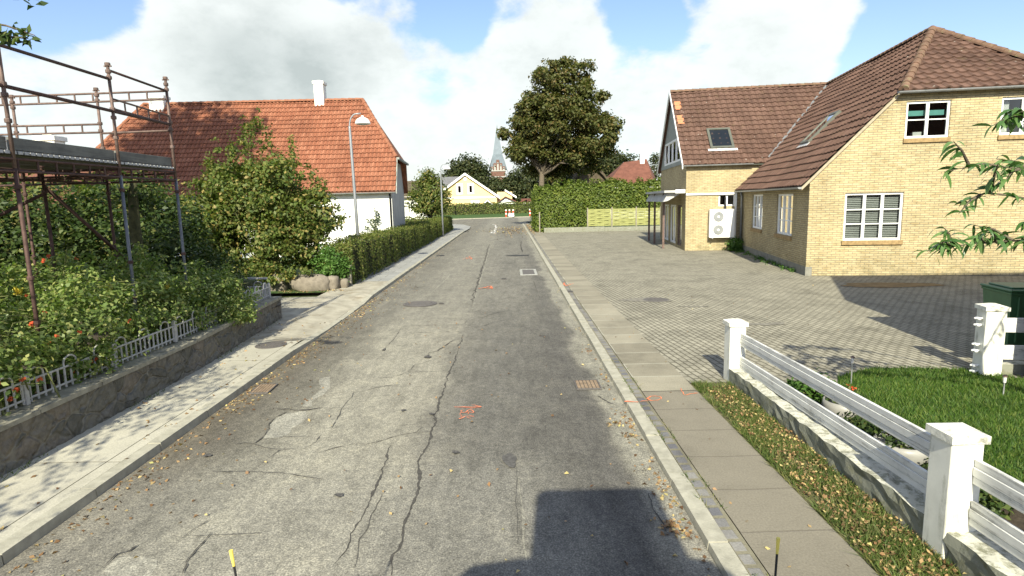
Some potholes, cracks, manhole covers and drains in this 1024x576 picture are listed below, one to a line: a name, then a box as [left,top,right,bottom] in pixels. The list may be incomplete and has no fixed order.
manhole cover [255,341,287,349]
crack [222,307,503,575]
crack [181,521,262,574]
